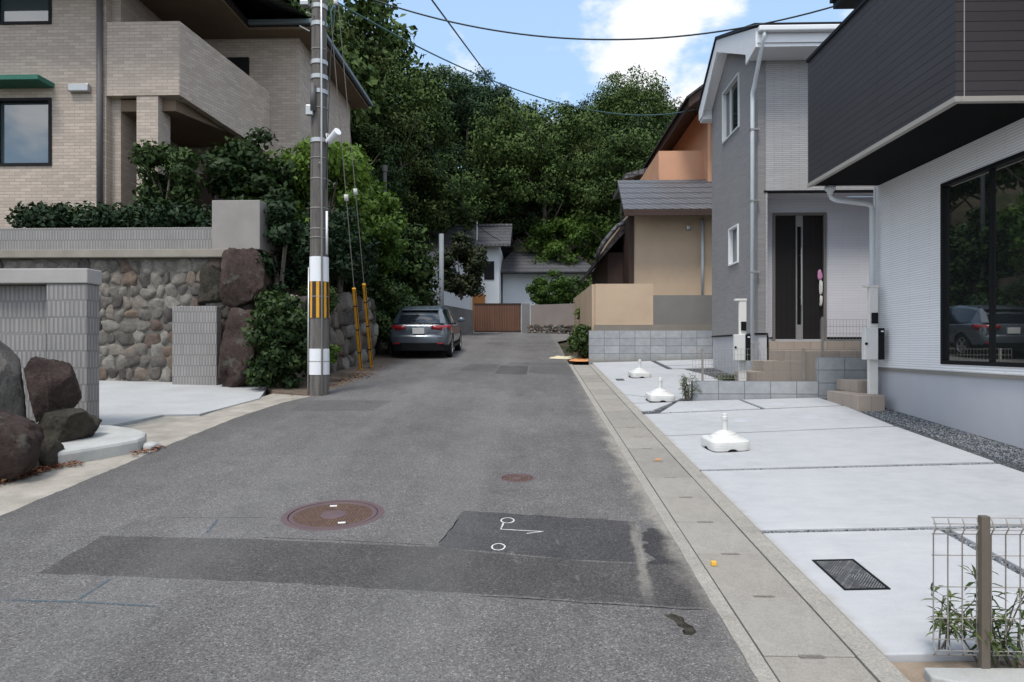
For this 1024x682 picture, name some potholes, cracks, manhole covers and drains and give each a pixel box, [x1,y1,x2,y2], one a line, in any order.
manhole cover [499,473,535,483]
manhole cover [281,500,384,531]
drain grate [812,559,891,590]
